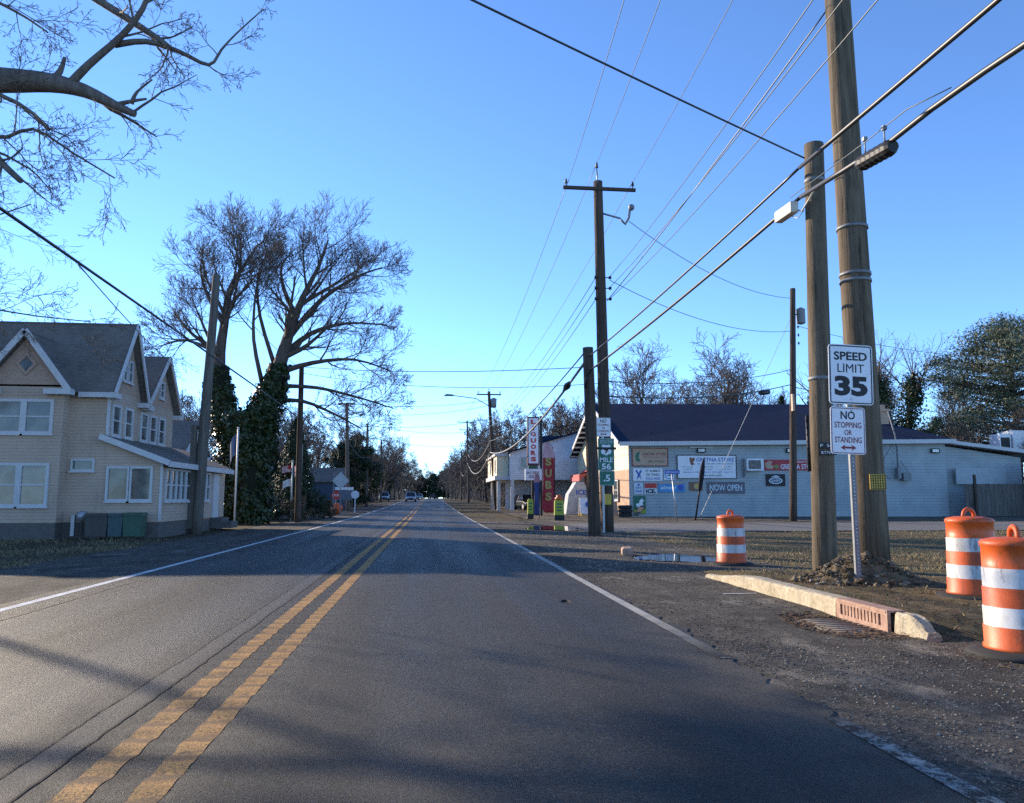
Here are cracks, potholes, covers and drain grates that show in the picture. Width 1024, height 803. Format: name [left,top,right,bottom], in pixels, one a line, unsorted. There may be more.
drain grate [792,598,905,633]
